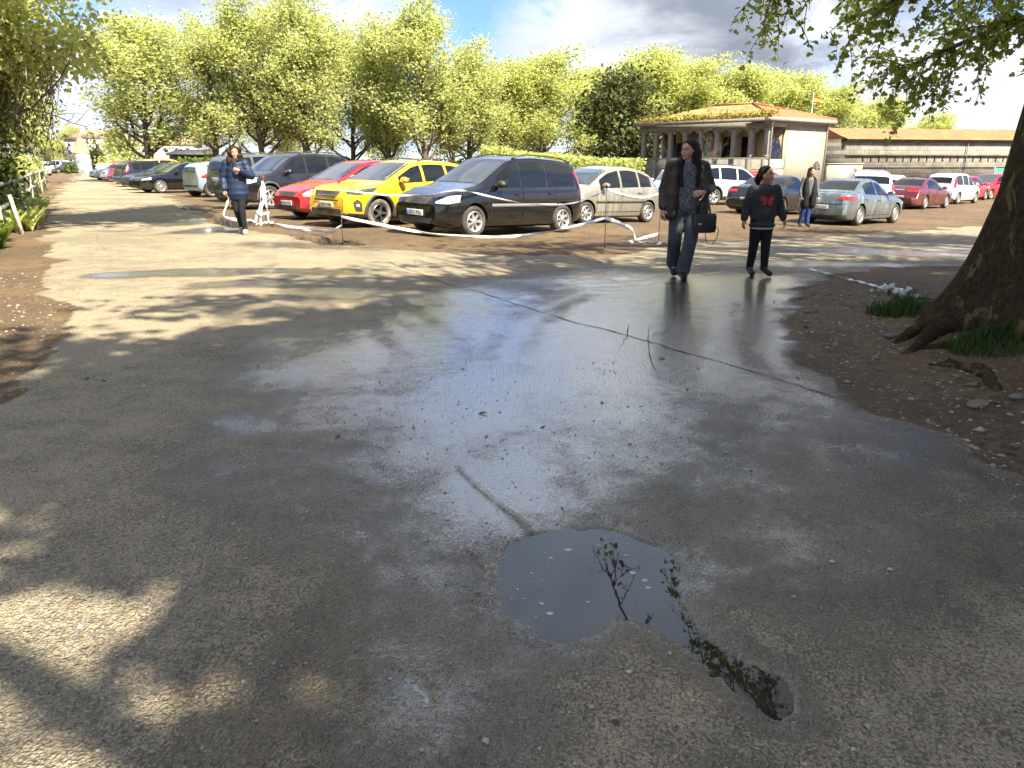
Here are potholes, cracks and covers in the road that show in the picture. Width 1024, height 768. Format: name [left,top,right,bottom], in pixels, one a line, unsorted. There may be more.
crack [394,264,894,419]
pothole [474,522,819,735]
